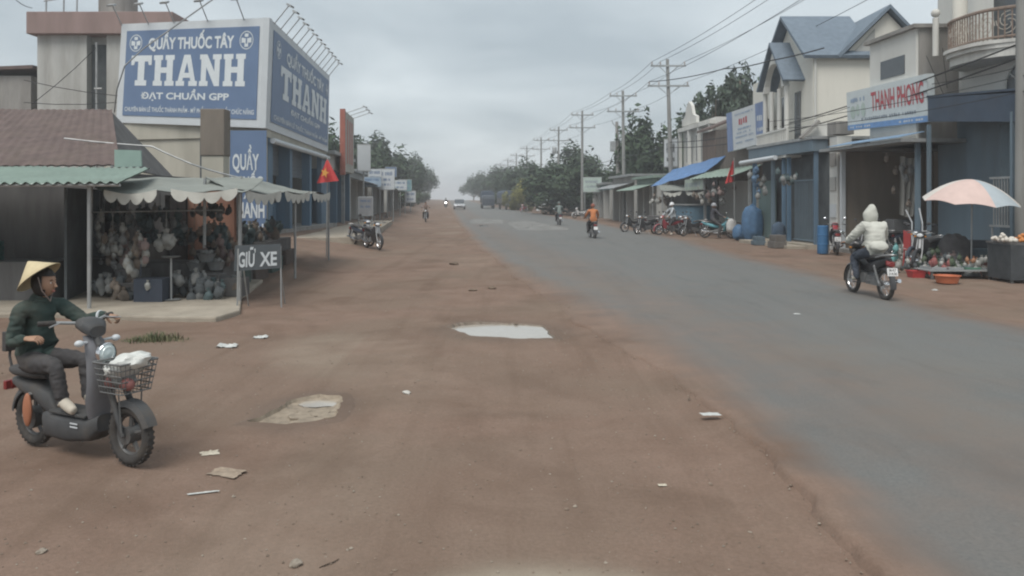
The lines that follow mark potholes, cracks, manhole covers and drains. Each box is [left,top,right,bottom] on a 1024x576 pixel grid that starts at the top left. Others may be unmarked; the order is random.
pothole [233,391,355,430]
pothole [439,321,564,341]
